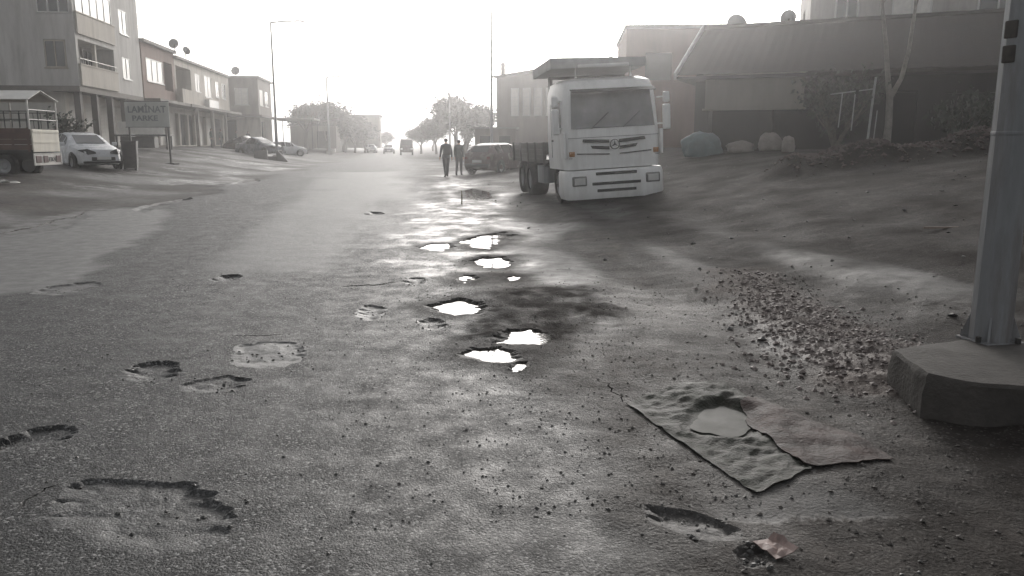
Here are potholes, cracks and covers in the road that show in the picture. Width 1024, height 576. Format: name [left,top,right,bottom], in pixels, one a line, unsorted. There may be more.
pothole [456,346,523,364]
pothole [122,360,183,382]
pothole [455,275,481,283]
pothole [468,256,515,268]
pothole [209,274,243,282]
pothole [178,374,253,393]
pothole [0,424,79,453]
pothole [44,478,238,557]
pothole [423,297,492,316]
pothole [355,304,388,321]
pothole [458,189,493,201]
pothole [507,360,530,372]
